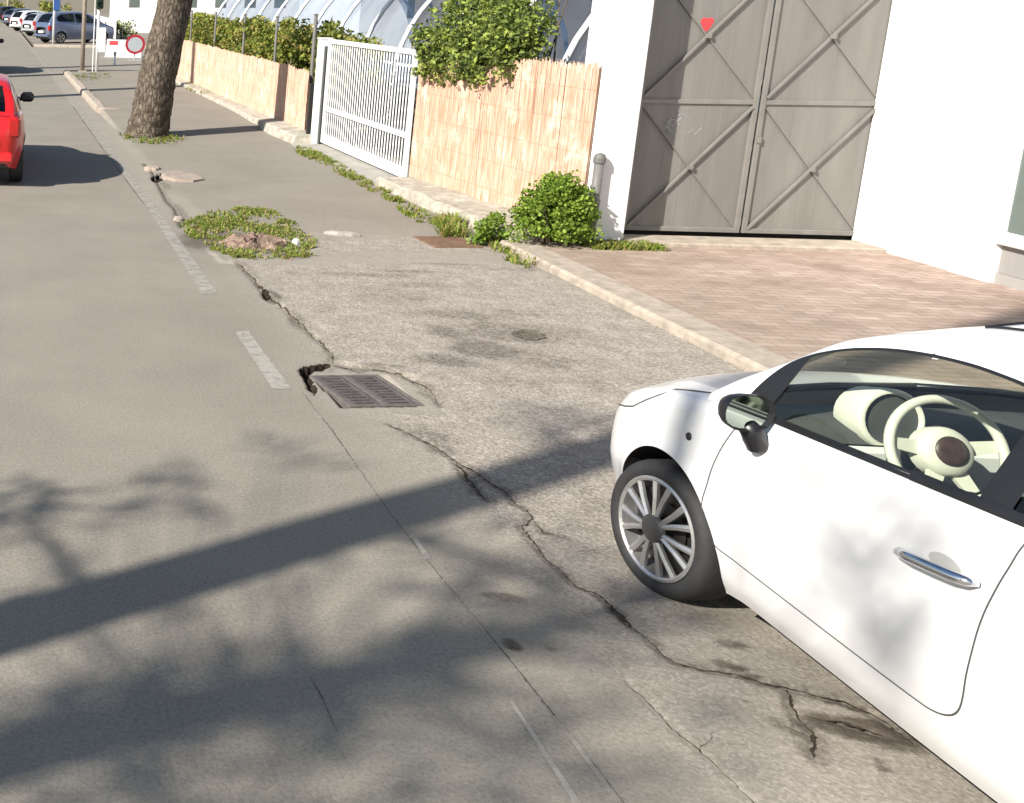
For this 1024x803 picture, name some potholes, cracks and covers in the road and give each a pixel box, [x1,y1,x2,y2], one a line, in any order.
crack [390,425,914,759]
drain grate [309,374,424,408]
crack [624,681,754,803]
manhole cover [413,236,483,248]
pothole [298,364,330,395]
crack [238,264,440,405]
